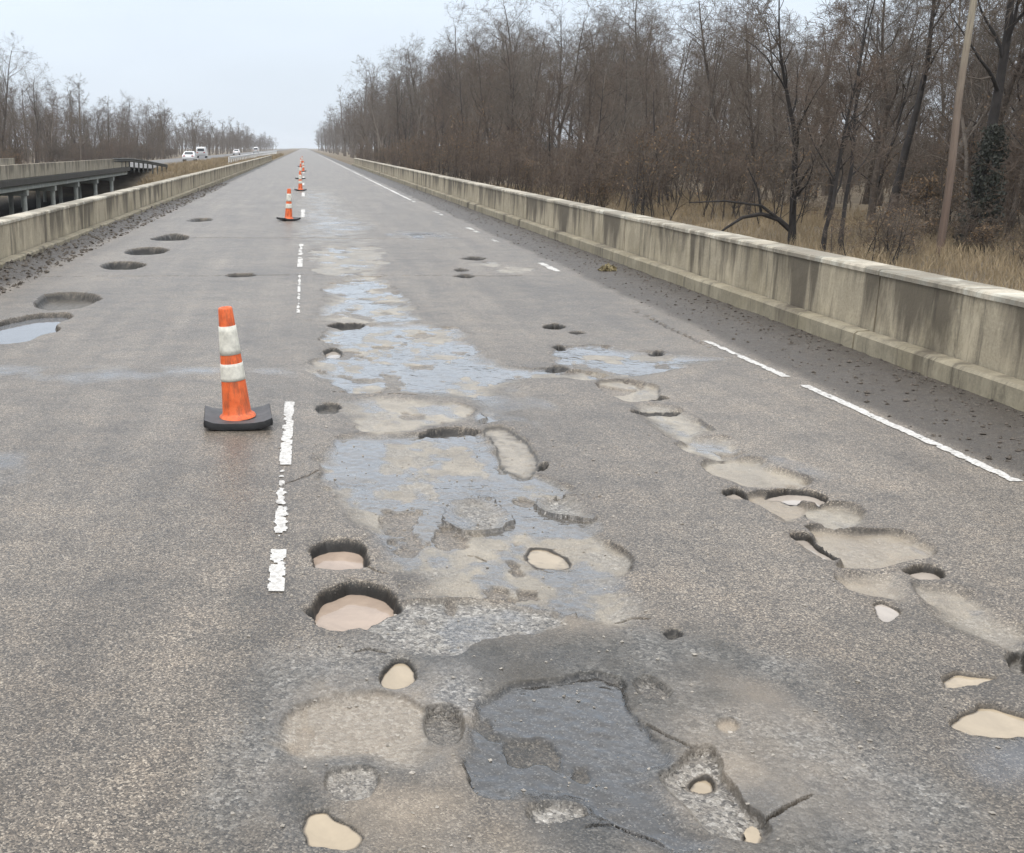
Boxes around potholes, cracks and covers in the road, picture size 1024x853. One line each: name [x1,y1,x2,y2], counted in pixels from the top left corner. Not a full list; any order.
pothole [123,247,170,255]
pothole [872,600,902,622]
pothole [377,658,420,690]
pothole [947,702,1024,738]
crack [756,795,812,829]
pothole [803,523,940,569]
pothole [789,531,841,560]
pothole [0,312,75,344]
pothole [309,430,659,634]
pothole [98,261,147,270]
pothole [747,489,808,524]
pothole [30,292,103,311]
